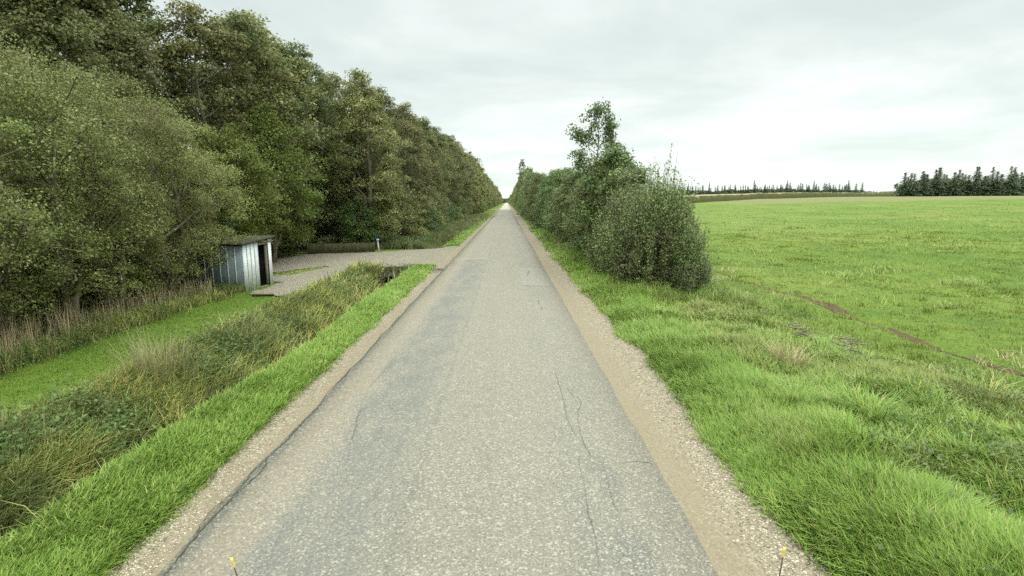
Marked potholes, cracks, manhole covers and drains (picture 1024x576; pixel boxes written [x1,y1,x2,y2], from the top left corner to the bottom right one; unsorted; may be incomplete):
crack [556,376,655,564]
